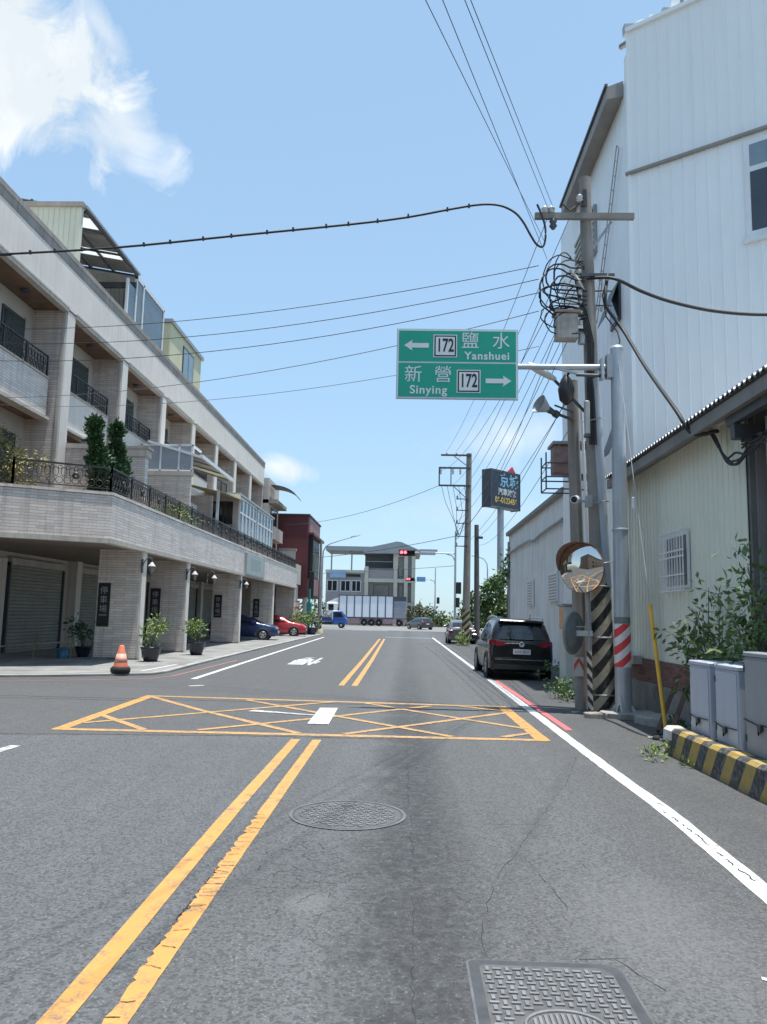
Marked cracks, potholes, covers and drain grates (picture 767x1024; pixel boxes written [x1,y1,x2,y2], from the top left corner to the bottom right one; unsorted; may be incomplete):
crack [406,739,416,1018]
crack [481,757,577,951]
manhole cover [289,800,406,830]
